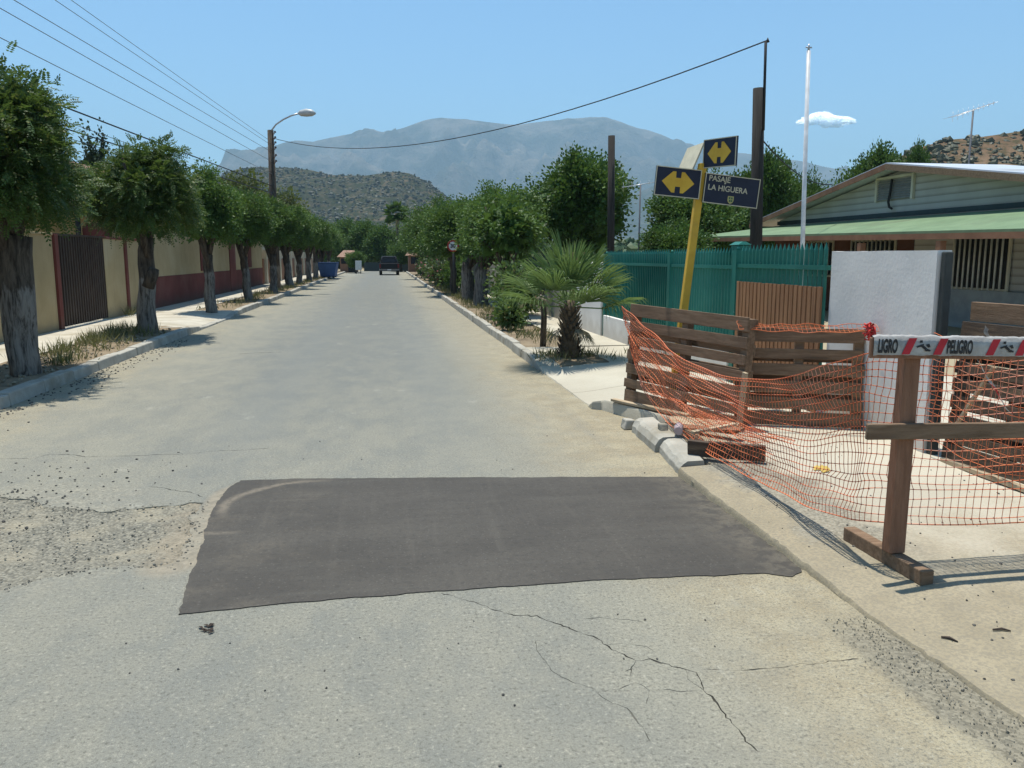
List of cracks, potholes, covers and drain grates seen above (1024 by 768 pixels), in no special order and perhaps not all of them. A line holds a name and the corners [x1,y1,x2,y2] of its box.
crack [441,593,854,752]
pothole [0,497,203,591]
crack [13,448,266,459]
